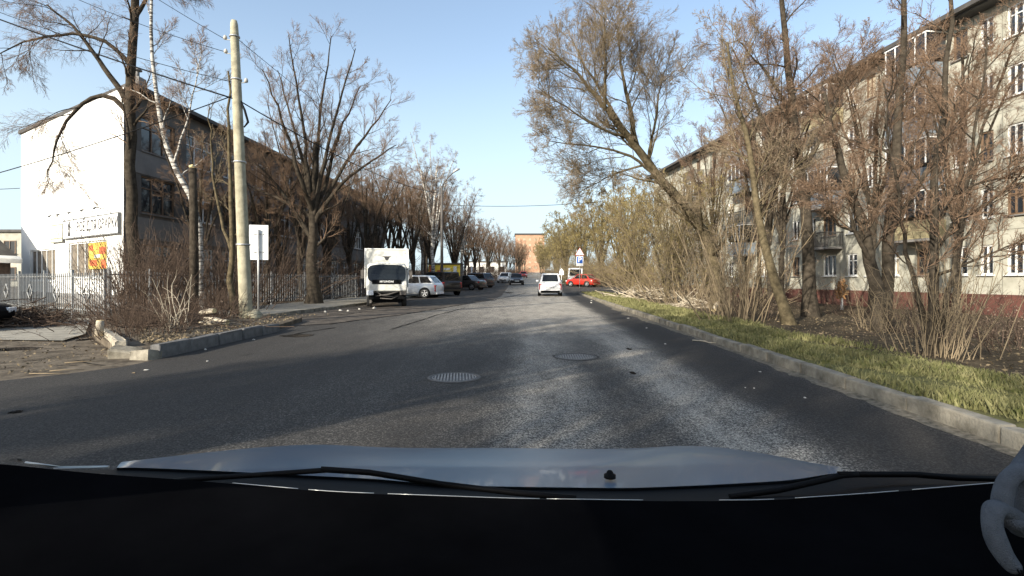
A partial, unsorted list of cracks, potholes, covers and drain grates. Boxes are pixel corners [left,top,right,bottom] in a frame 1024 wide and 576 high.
manhole cover [424,372,485,383]
